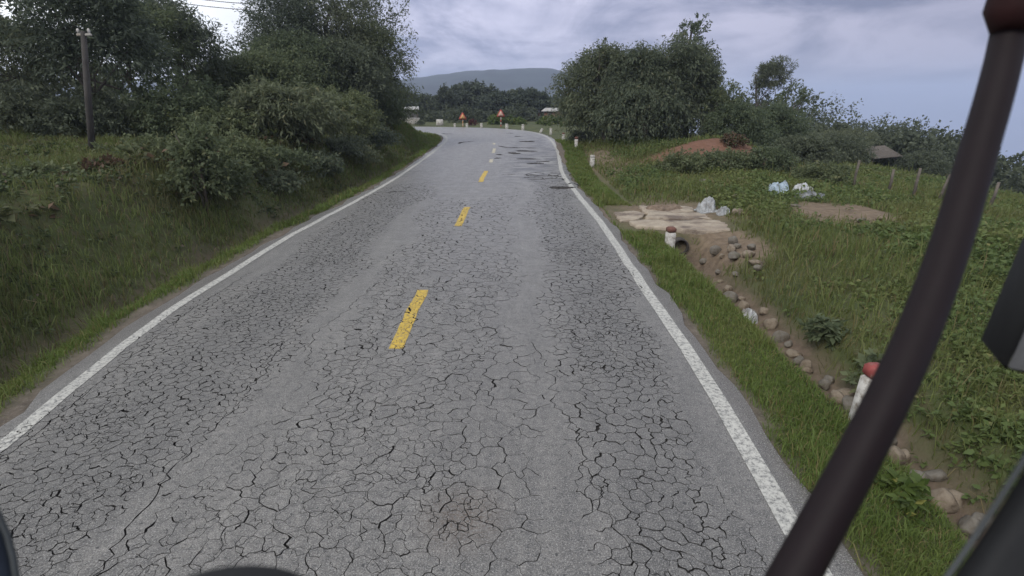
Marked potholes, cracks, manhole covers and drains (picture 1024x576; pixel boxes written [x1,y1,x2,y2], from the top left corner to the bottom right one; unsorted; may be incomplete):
crack [0,182,553,576]
crack [524,172,578,186]
crack [520,181,776,576]
